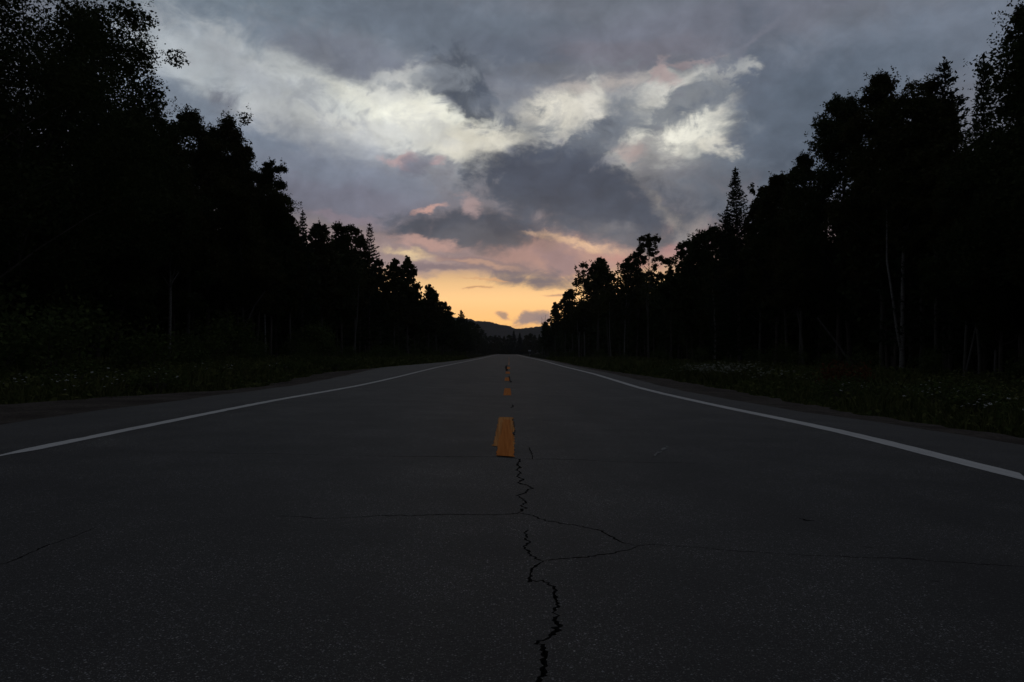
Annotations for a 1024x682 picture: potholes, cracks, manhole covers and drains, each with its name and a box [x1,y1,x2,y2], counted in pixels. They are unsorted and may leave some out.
crack [2,527,96,564]
crack [232,405,1024,682]
